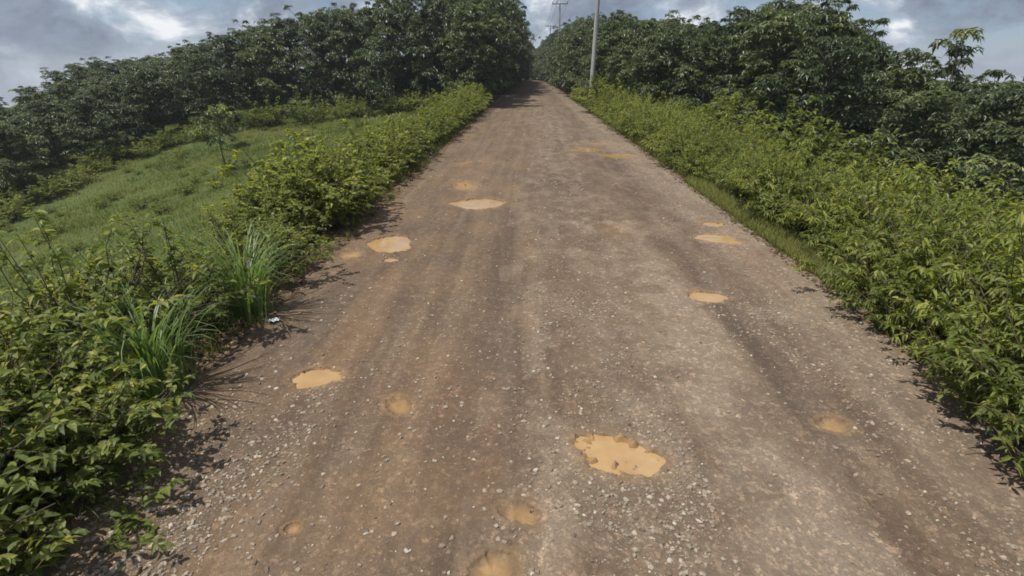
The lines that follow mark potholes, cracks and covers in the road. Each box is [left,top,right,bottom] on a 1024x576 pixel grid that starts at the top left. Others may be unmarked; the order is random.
pothole [455,538,533,576]
pothole [688,233,748,246]
pothole [448,178,485,192]
pothole [680,288,737,306]
pothole [559,426,682,486]
pothole [280,362,354,394]
pothole [489,494,550,533]
pothole [278,519,306,537]
pothole [807,411,860,437]
pothole [379,390,419,420]
pothole [697,220,732,228]
pothole [443,197,511,211]
